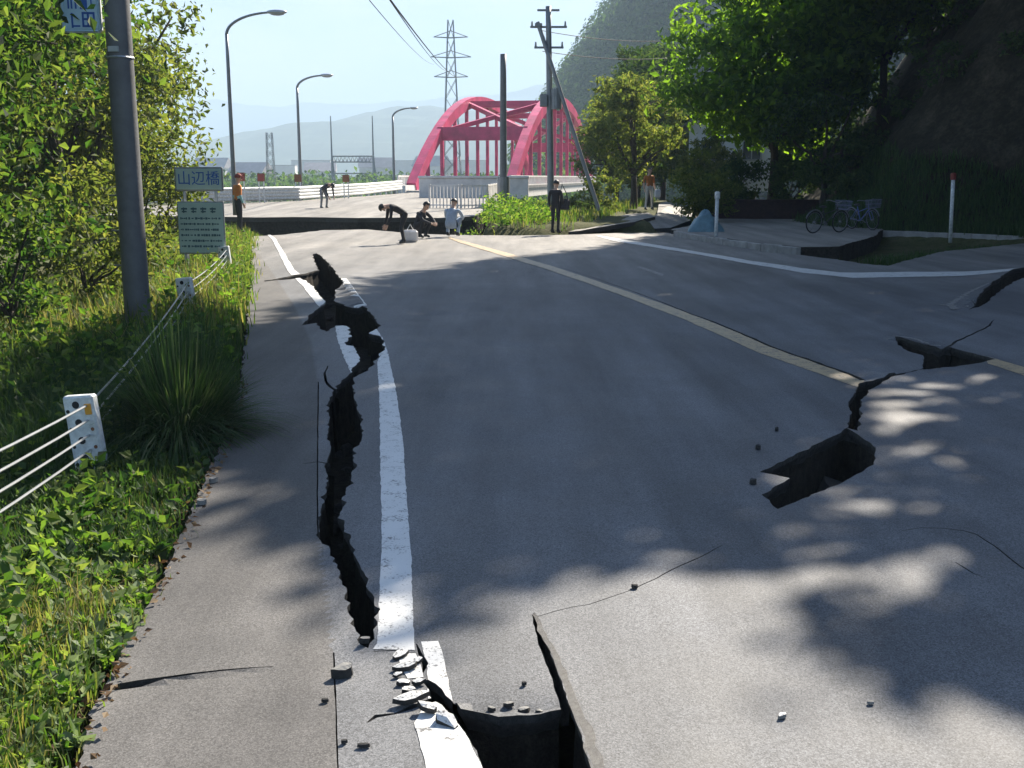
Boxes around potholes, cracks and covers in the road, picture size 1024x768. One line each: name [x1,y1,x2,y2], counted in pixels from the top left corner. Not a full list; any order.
crack [264,253,385,722]
crack [570,270,923,475]
pothole [368,644,591,768]
crack [101,666,273,696]
crack [940,268,1024,309]
crack [532,545,722,768]
crack [902,528,1024,578]
